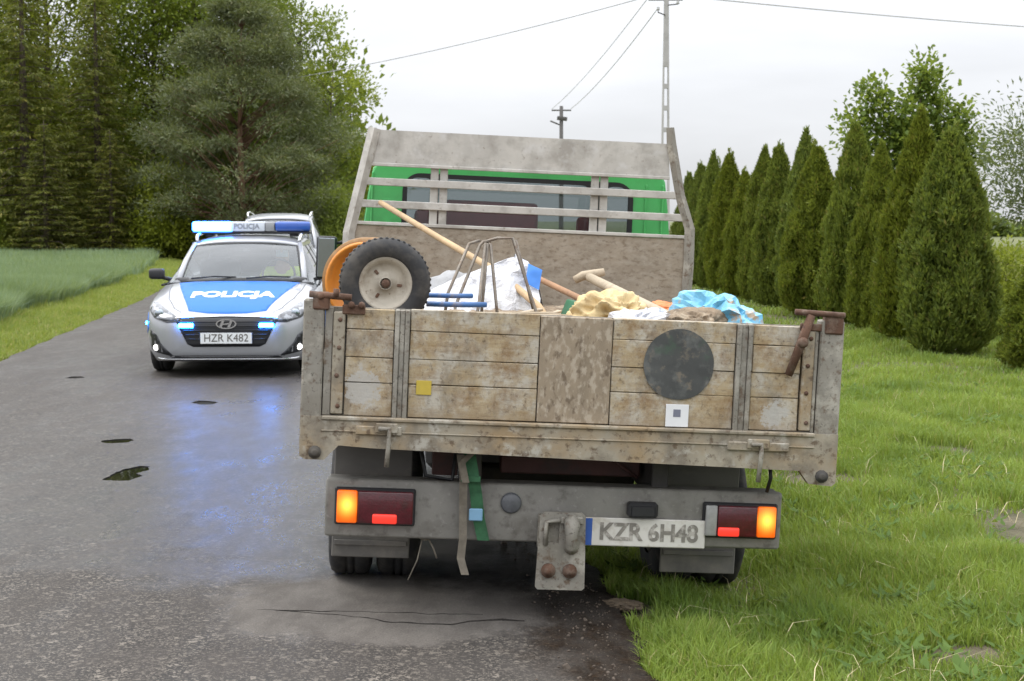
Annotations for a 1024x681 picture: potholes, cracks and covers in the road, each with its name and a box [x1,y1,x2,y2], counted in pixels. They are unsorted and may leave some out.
pothole [102,466,149,481]
crack [264,609,523,625]
